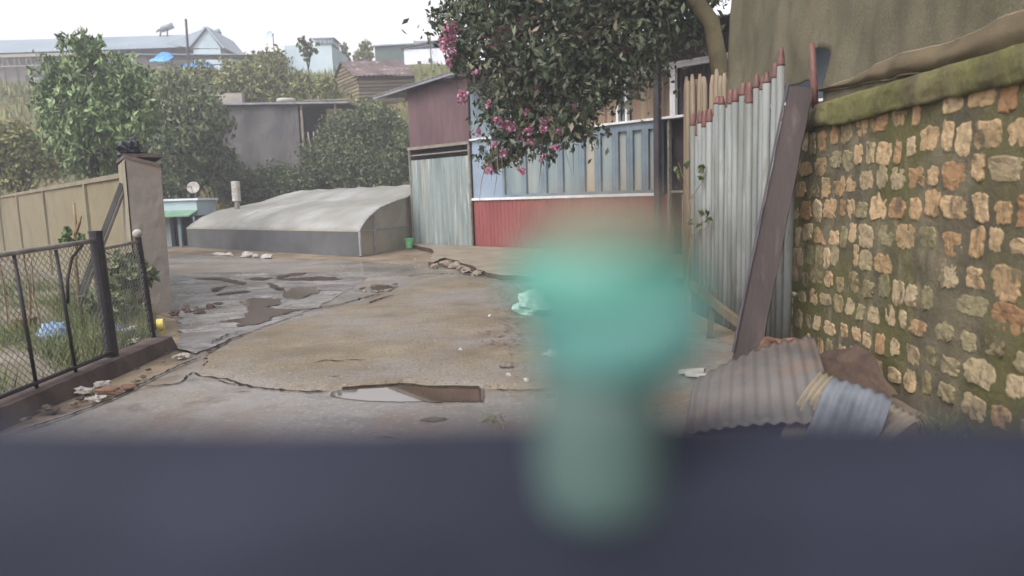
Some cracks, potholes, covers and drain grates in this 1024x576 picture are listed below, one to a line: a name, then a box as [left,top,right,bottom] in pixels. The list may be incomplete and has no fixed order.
pothole [330,383,484,402]
crack [38,331,363,424]
crack [296,293,392,311]
